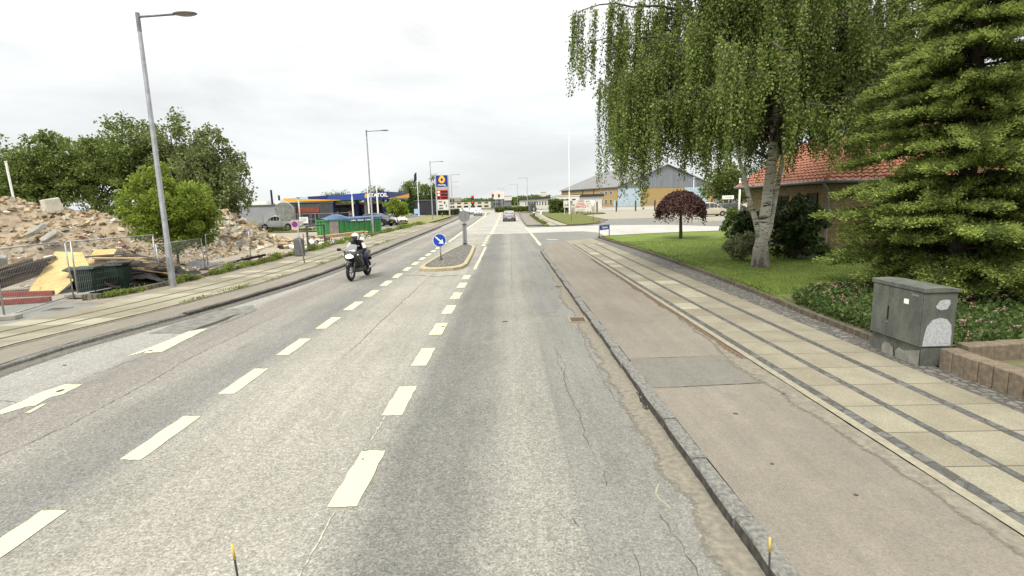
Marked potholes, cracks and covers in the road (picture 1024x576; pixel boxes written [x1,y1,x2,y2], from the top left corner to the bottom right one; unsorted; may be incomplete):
crack [554,346,607,486]
